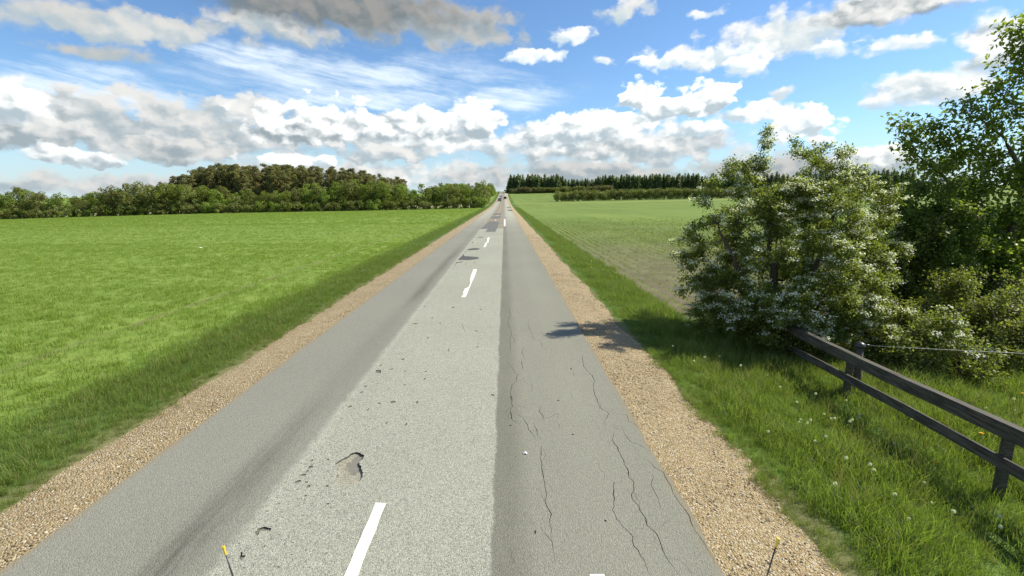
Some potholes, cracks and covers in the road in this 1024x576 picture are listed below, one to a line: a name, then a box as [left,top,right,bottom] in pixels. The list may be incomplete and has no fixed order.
crack [502,309,566,569]
crack [573,356,712,575]
pothole [335,452,365,486]
